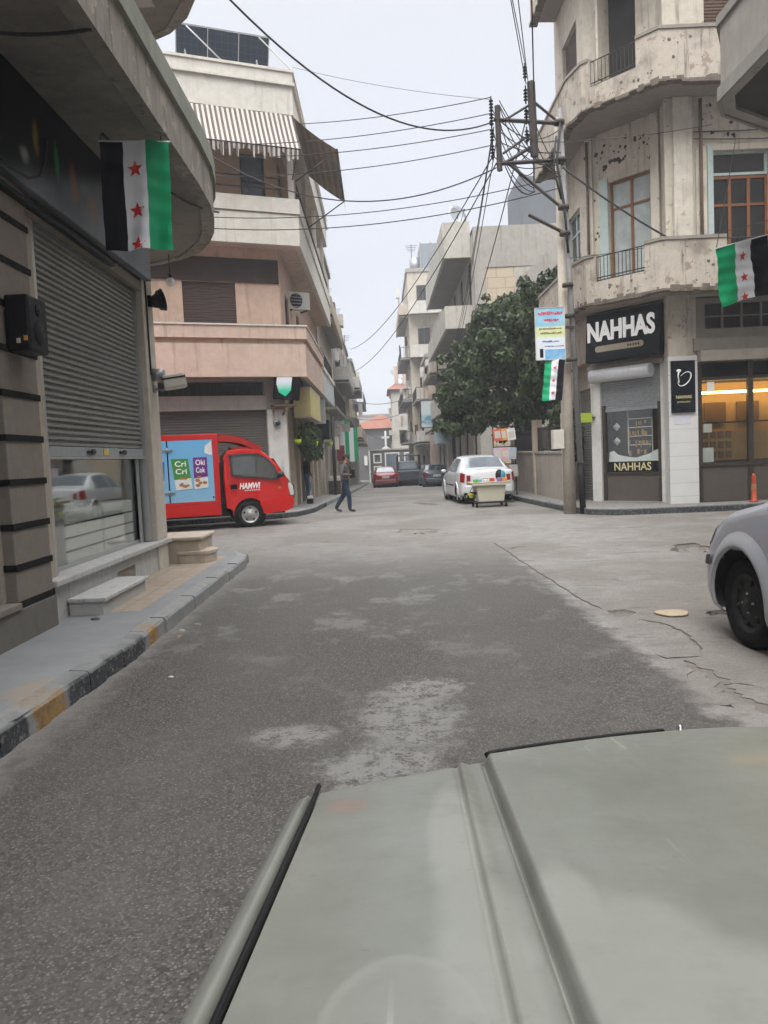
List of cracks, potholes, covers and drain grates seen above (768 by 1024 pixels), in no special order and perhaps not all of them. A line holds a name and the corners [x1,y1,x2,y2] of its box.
pothole [670,543,710,553]
crack [645,620,768,714]
